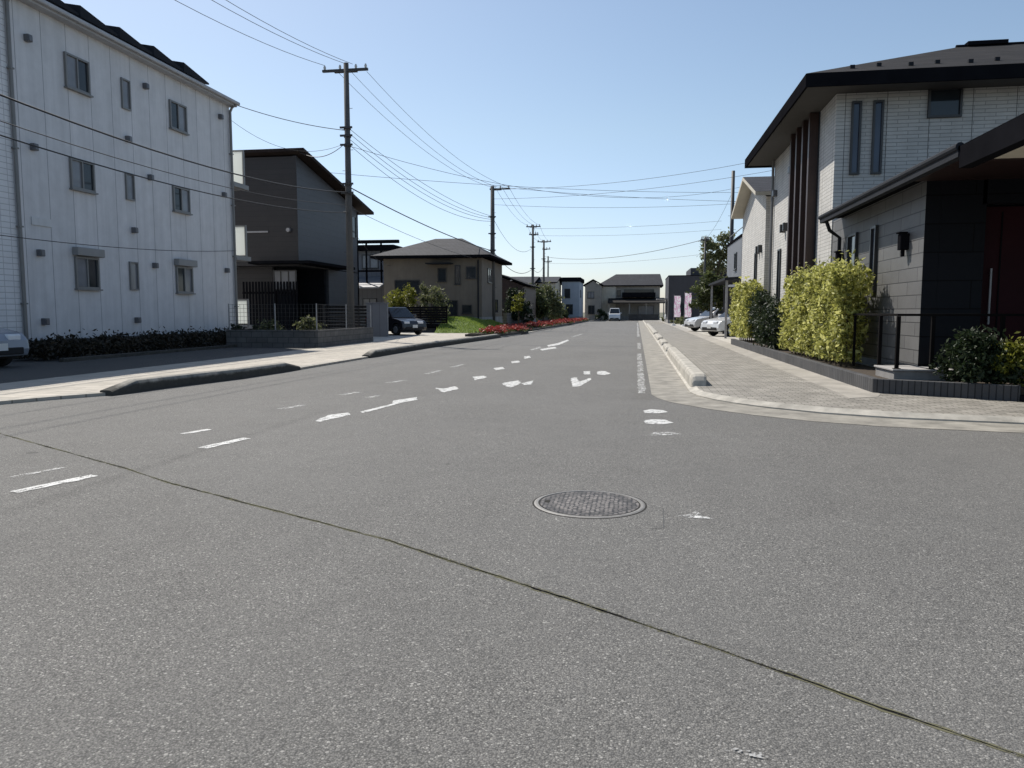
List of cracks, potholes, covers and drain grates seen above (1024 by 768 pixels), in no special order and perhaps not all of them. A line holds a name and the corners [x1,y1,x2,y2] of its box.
manhole cover [532,490,647,519]
